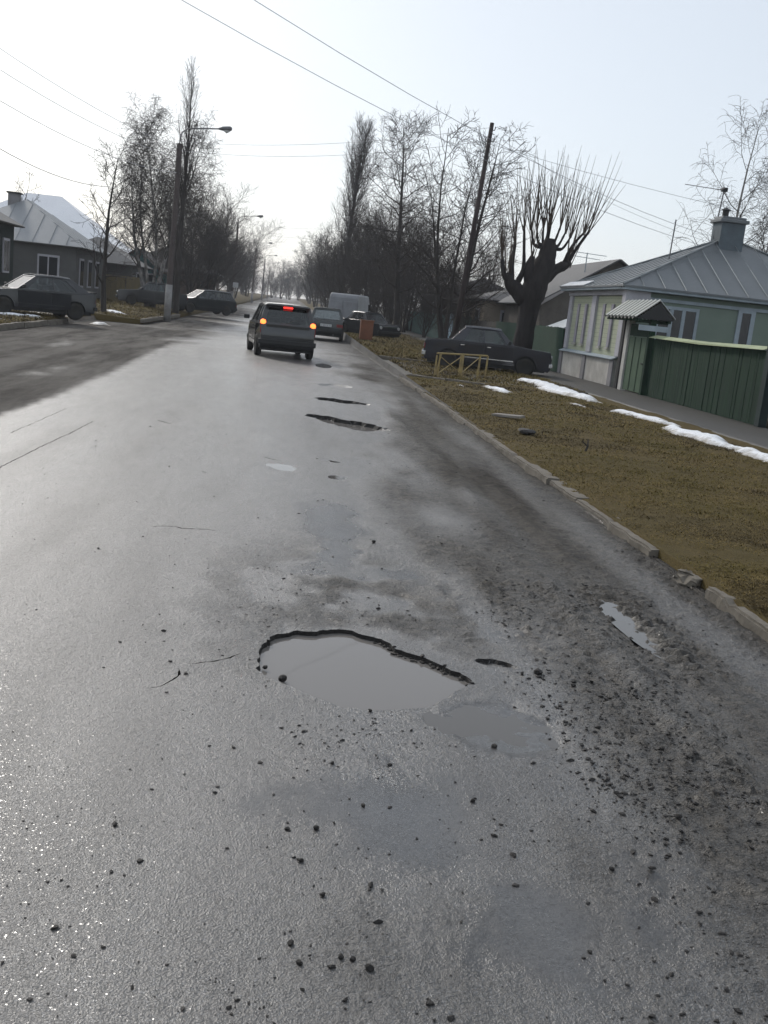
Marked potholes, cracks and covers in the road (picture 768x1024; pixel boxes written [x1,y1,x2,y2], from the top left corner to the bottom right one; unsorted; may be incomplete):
pothole [305,414,390,432]
pothole [316,397,370,405]
pothole [256,629,472,711]
crack [147,654,238,689]
pothole [474,659,518,670]
